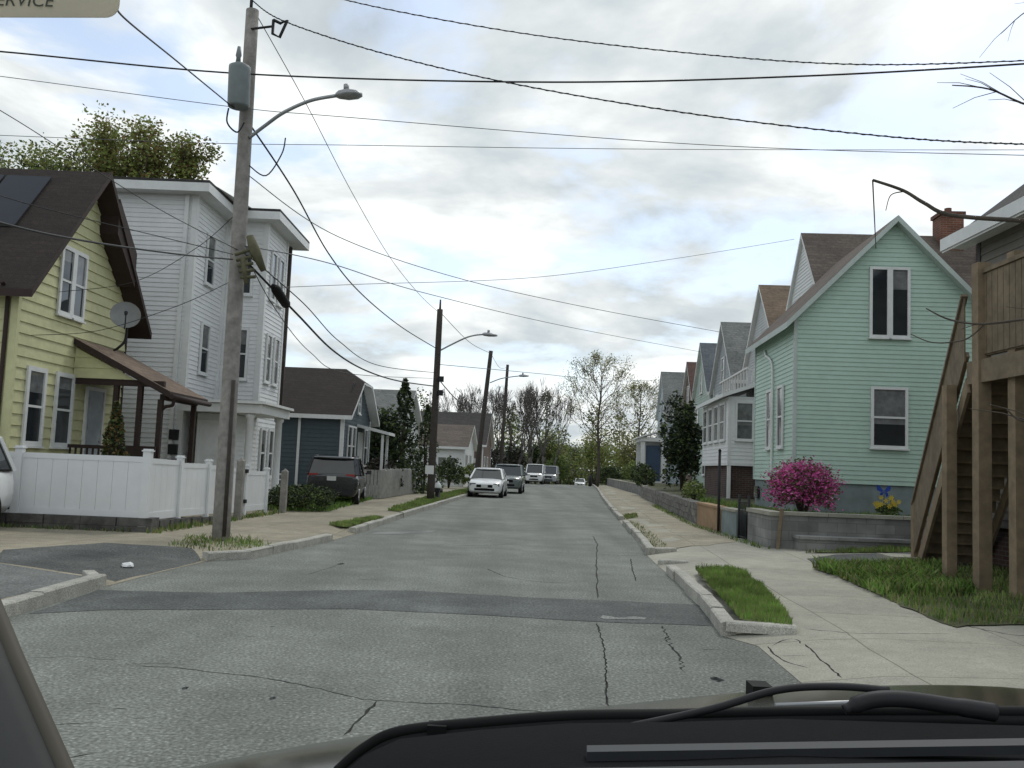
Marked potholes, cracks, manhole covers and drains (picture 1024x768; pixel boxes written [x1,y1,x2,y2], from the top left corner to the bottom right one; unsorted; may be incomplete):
crack [144,663,541,735]
crack [596,623,609,706]
crack [661,626,685,672]
crack [768,638,841,677]
